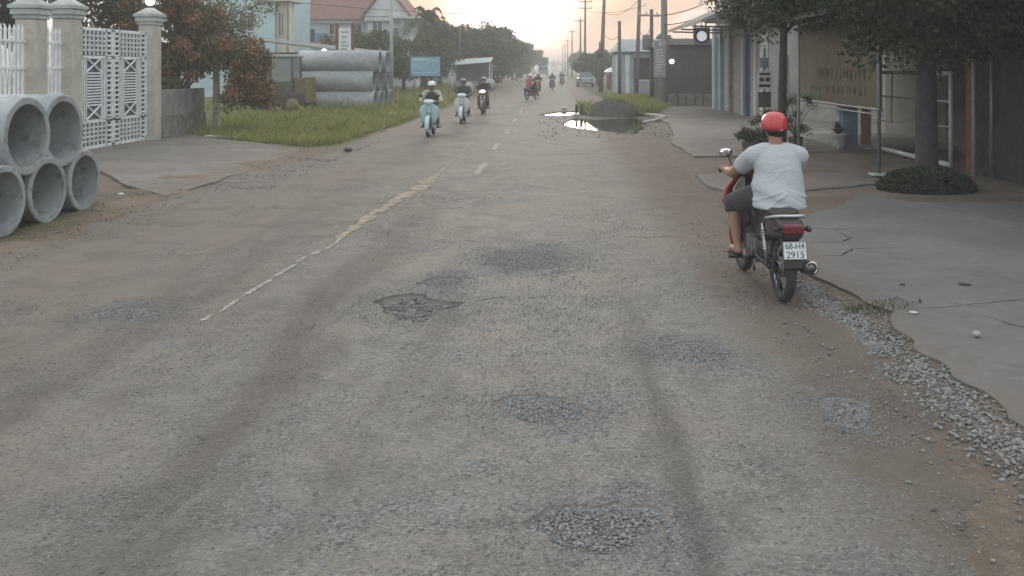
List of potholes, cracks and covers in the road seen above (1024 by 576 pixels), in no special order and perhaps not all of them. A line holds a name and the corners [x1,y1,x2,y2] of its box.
pothole [372,293,468,323]
crack [813,228,890,257]
